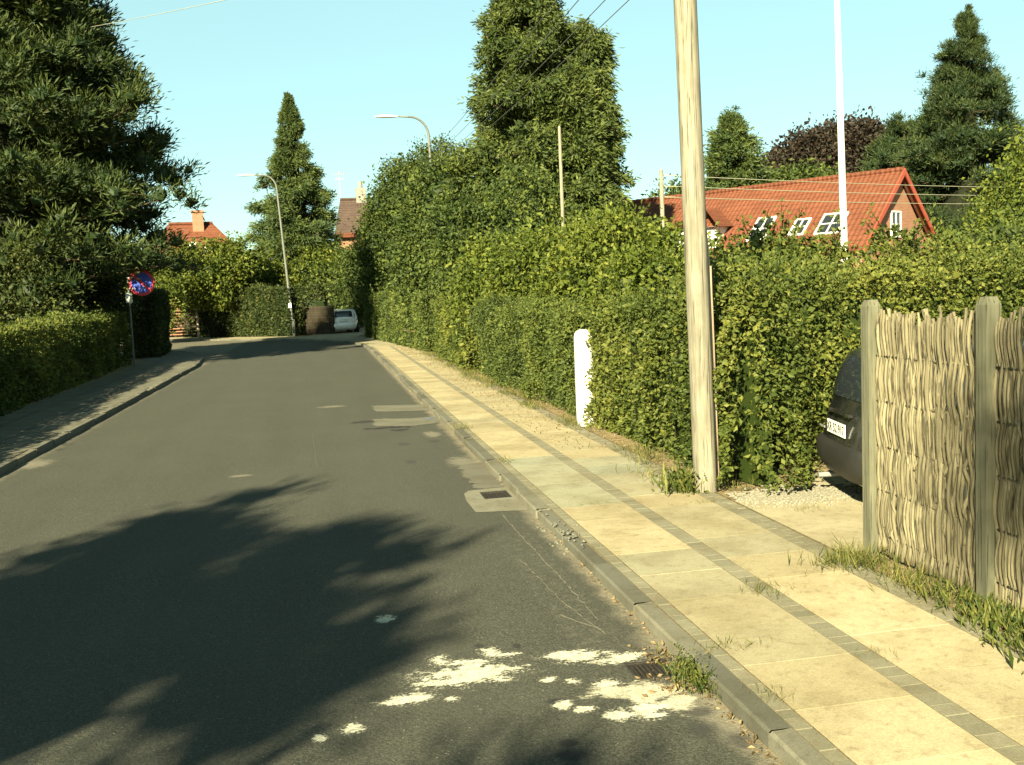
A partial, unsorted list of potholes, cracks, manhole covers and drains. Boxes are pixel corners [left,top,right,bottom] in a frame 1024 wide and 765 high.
crack [519,559,606,635]
drain grate [480,490,512,499]
drain grate [624,659,678,680]
